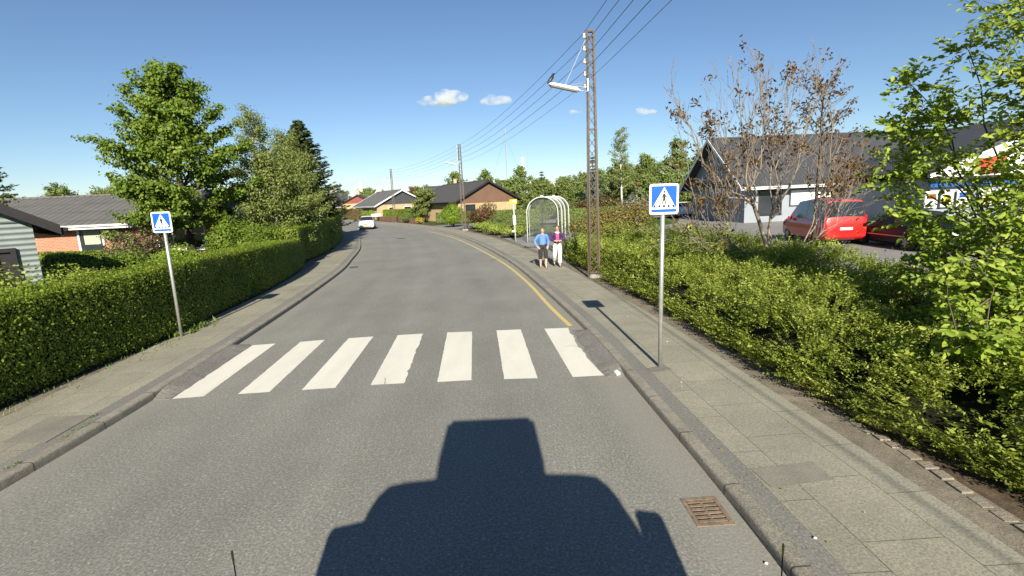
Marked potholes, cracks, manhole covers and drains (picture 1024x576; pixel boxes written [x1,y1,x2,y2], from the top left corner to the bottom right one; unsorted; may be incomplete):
drain grate [680,496,736,527]
